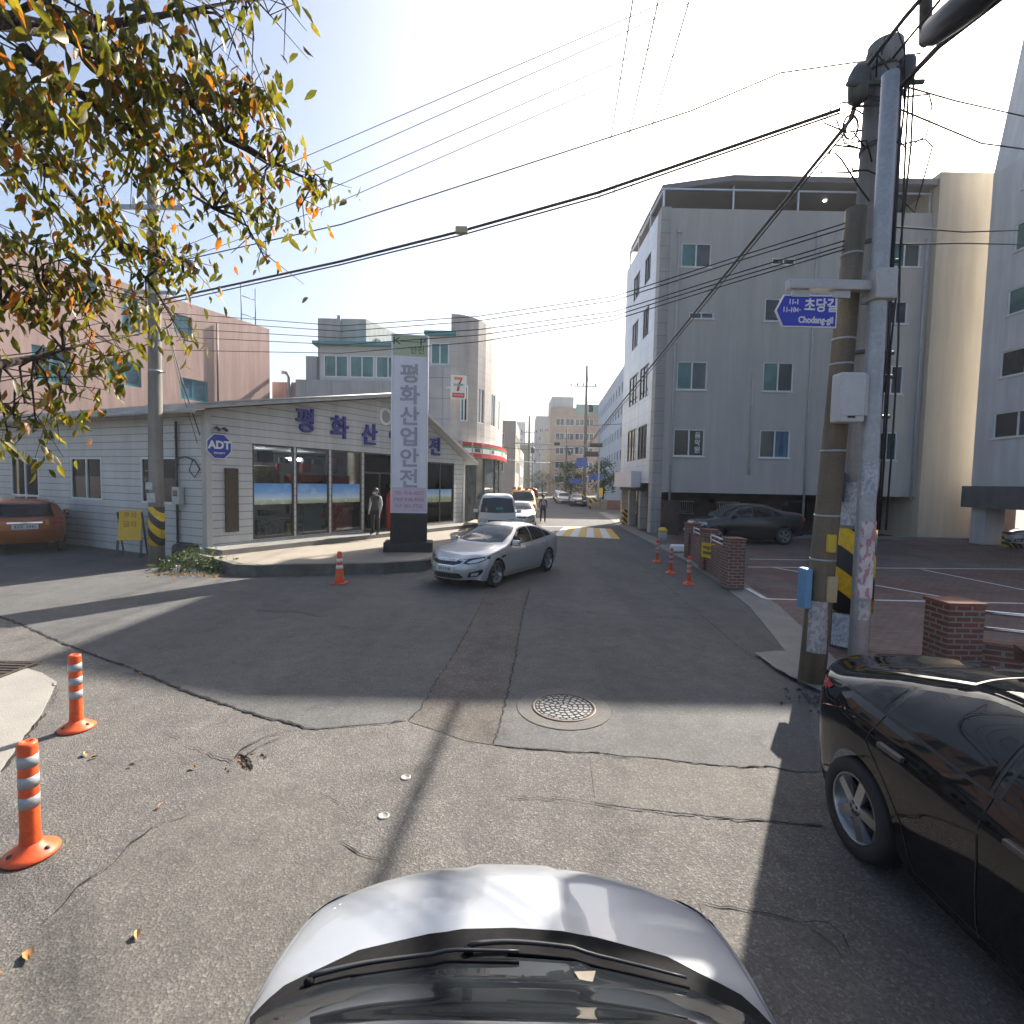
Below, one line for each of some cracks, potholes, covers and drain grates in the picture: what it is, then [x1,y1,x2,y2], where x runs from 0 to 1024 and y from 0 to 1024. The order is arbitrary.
crack [699,900,850,959]
manhole cover [517,688,611,730]
crack [318,791,378,858]
crack [502,796,823,826]
drain grate [0,660,41,678]
crack [0,616,402,767]
crack [495,744,792,771]
pothole [225,752,267,772]
crack [45,815,186,920]
